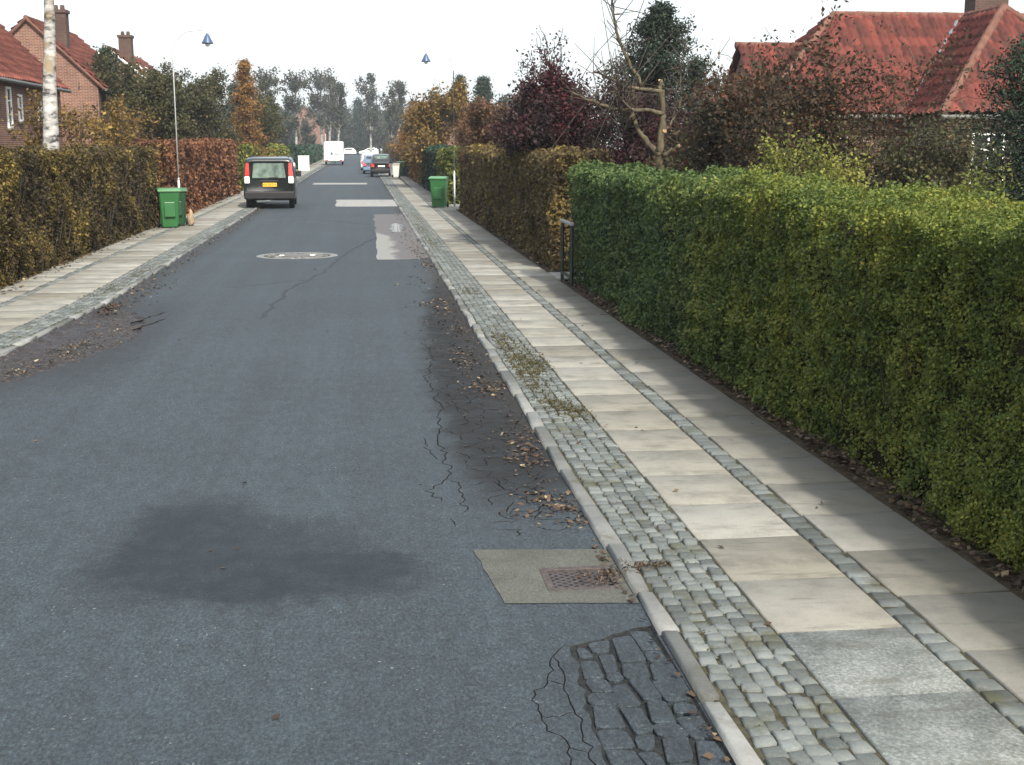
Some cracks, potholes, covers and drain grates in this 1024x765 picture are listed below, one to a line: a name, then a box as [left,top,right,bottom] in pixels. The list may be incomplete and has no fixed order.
crack [422,303,569,536]
crack [531,645,596,765]
drain grate [473,549,639,603]
